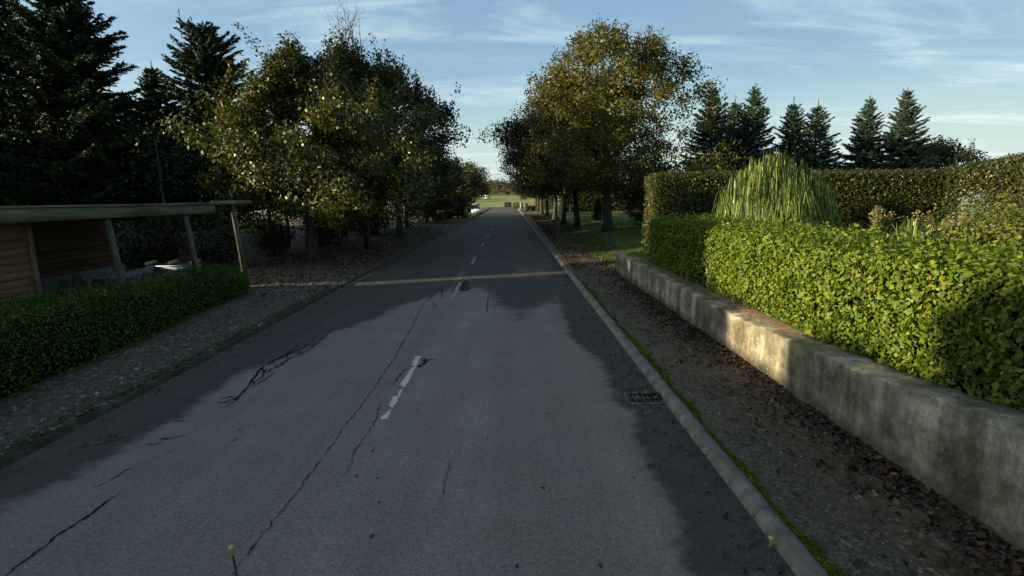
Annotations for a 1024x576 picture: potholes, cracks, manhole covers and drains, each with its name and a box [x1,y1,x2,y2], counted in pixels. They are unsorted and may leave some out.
crack [6,468,131,575]
